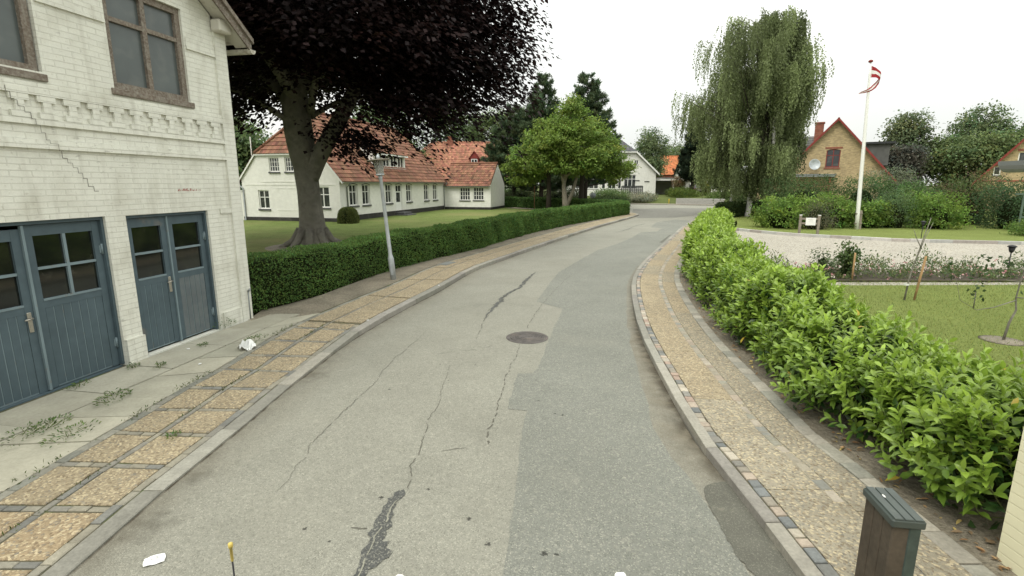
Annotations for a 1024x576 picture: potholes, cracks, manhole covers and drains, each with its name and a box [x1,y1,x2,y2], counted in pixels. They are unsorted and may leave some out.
crack [407,276,570,487]
manhole cover [506,331,548,344]
crack [277,330,427,491]
